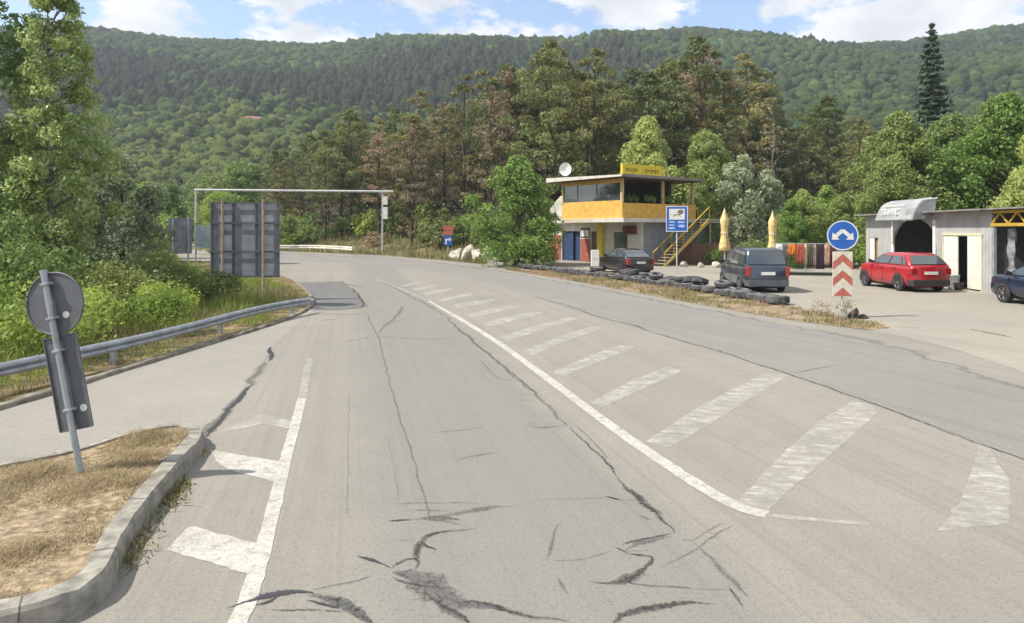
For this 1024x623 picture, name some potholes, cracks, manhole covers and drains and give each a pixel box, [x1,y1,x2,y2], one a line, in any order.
crack [357,516,566,623]
crack [458,328,741,623]
